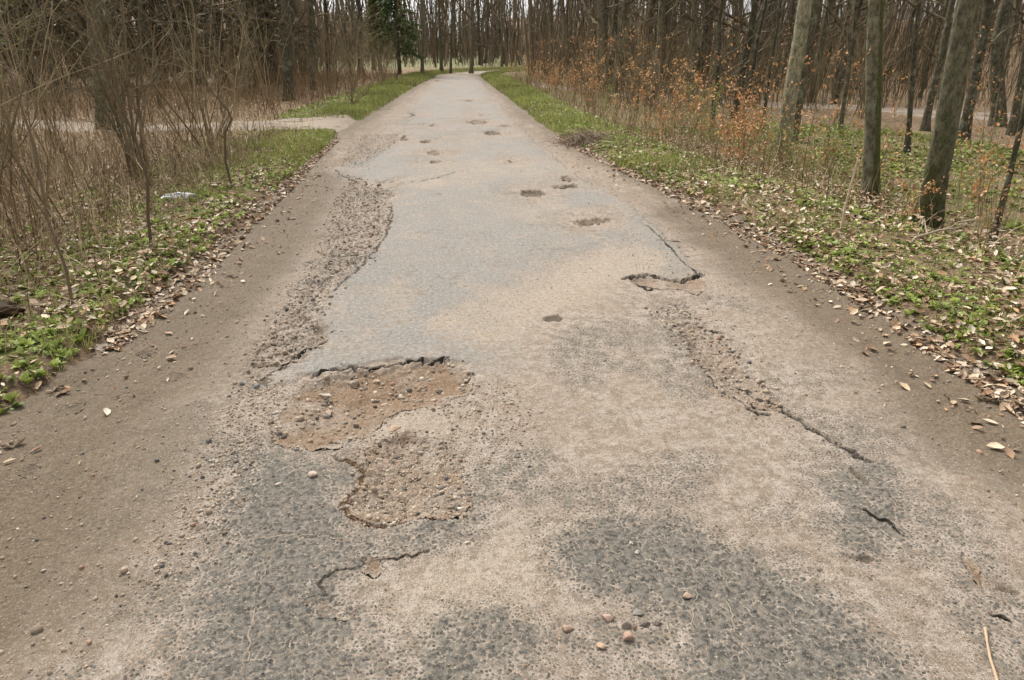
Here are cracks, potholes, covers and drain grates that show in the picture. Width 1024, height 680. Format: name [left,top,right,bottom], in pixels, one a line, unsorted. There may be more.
pothole [274,361,475,452]
crack [629,225,702,291]
crack [242,458,428,668]
pothole [344,431,473,524]
crack [856,506,904,536]
pothole [630,276,709,295]
crack [735,387,858,459]
pothole [571,218,610,227]
